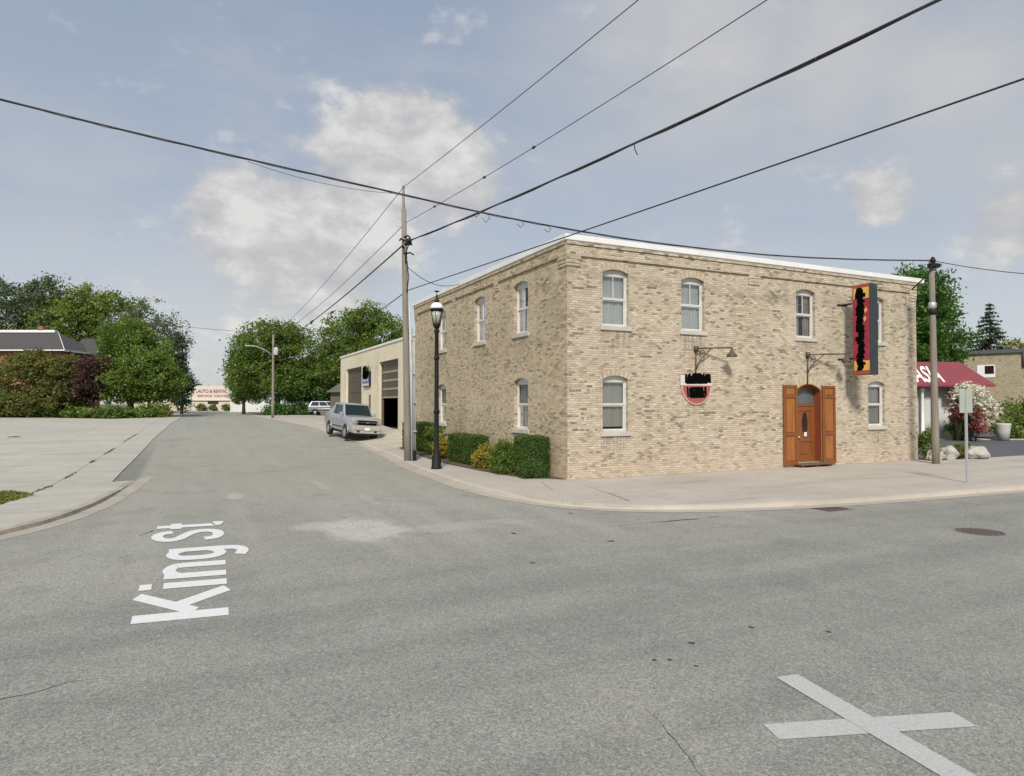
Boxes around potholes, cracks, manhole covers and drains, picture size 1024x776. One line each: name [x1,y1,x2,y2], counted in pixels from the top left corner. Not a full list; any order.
manhole cover [954,528,1006,536]
crack [0,677,109,700]
crack [648,711,701,776]
